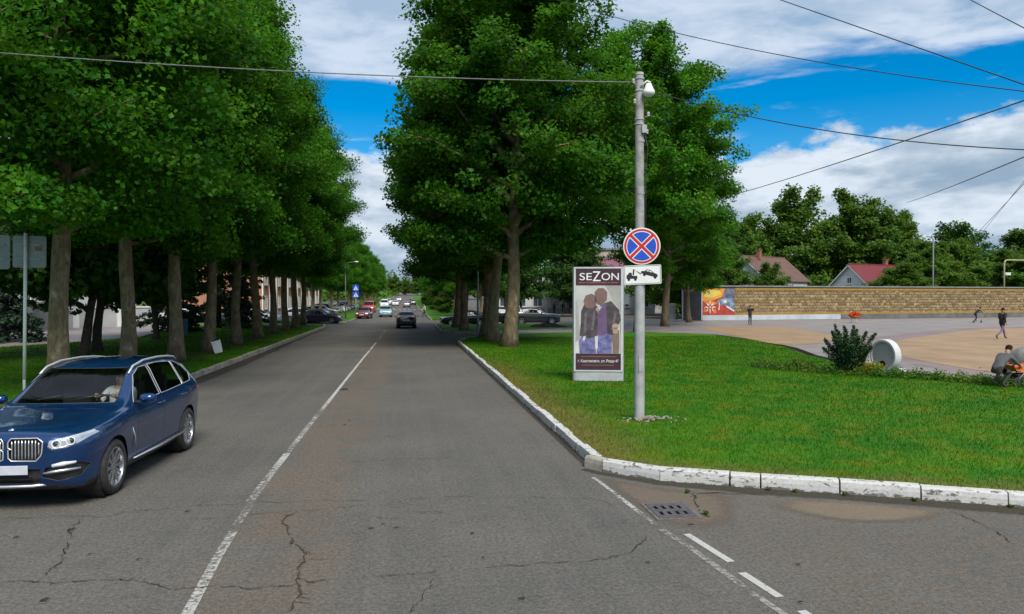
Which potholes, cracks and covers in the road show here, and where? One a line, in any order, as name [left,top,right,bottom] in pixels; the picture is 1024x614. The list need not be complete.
crack [489,535,647,567]
drain grate [640,502,704,521]
crack [8,500,361,612]
